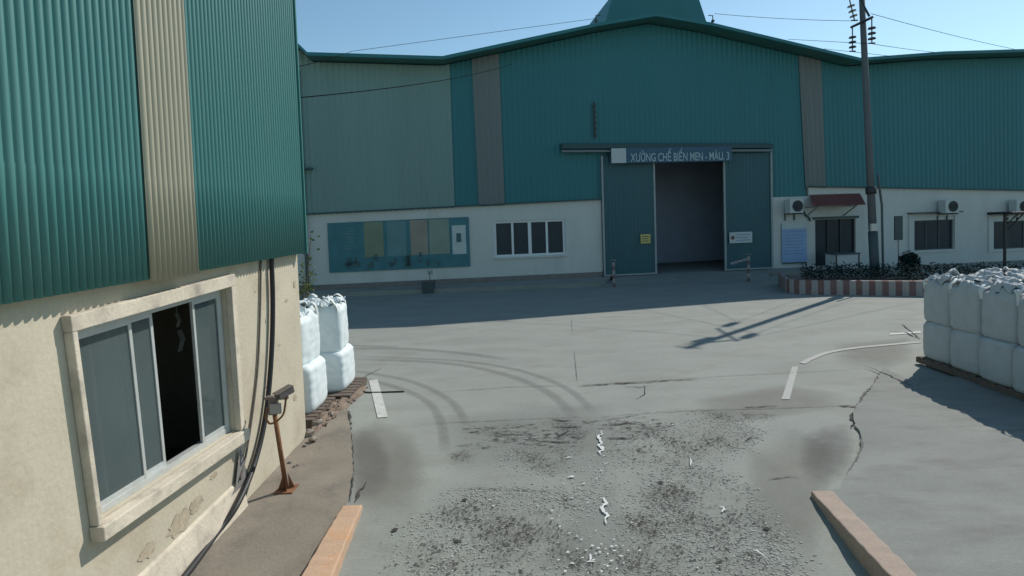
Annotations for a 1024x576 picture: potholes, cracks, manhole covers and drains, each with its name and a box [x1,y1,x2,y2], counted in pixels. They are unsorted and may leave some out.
crack [544,379,691,442]
crack [838,367,912,473]
